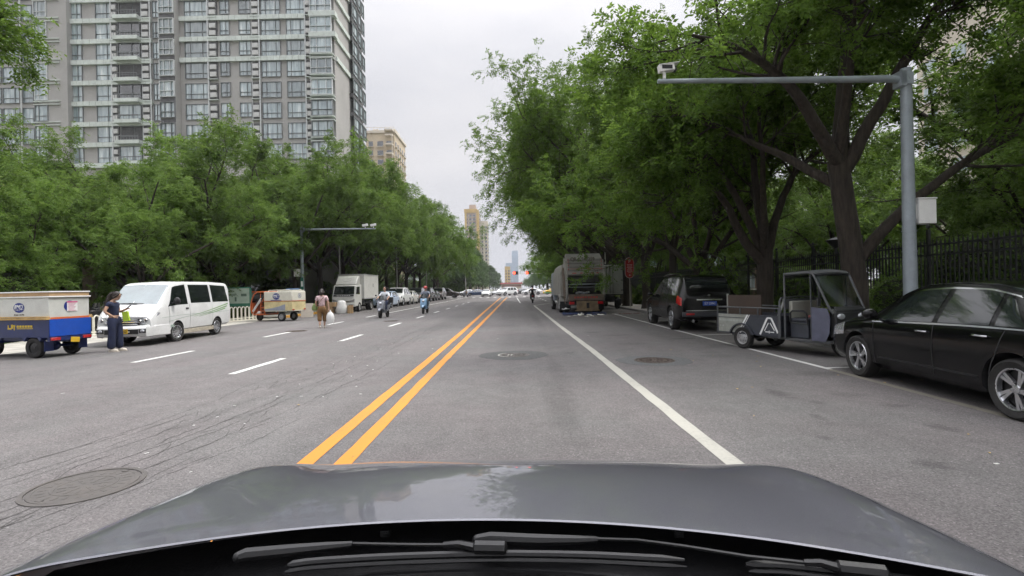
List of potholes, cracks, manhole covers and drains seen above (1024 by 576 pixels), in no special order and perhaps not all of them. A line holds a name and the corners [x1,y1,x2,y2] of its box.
manhole cover [616,355,693,366]
crack [0,322,445,551]
manhole cover [15,467,147,508]
manhole cover [479,351,549,360]
